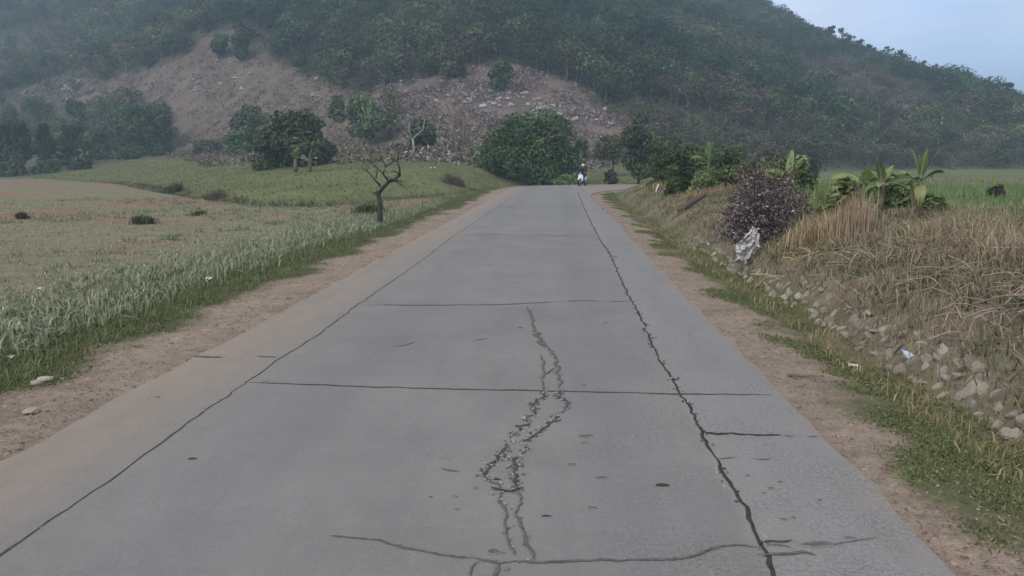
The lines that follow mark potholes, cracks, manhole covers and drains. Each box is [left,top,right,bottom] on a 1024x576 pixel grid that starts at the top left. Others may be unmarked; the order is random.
crack [331,307,571,576]
